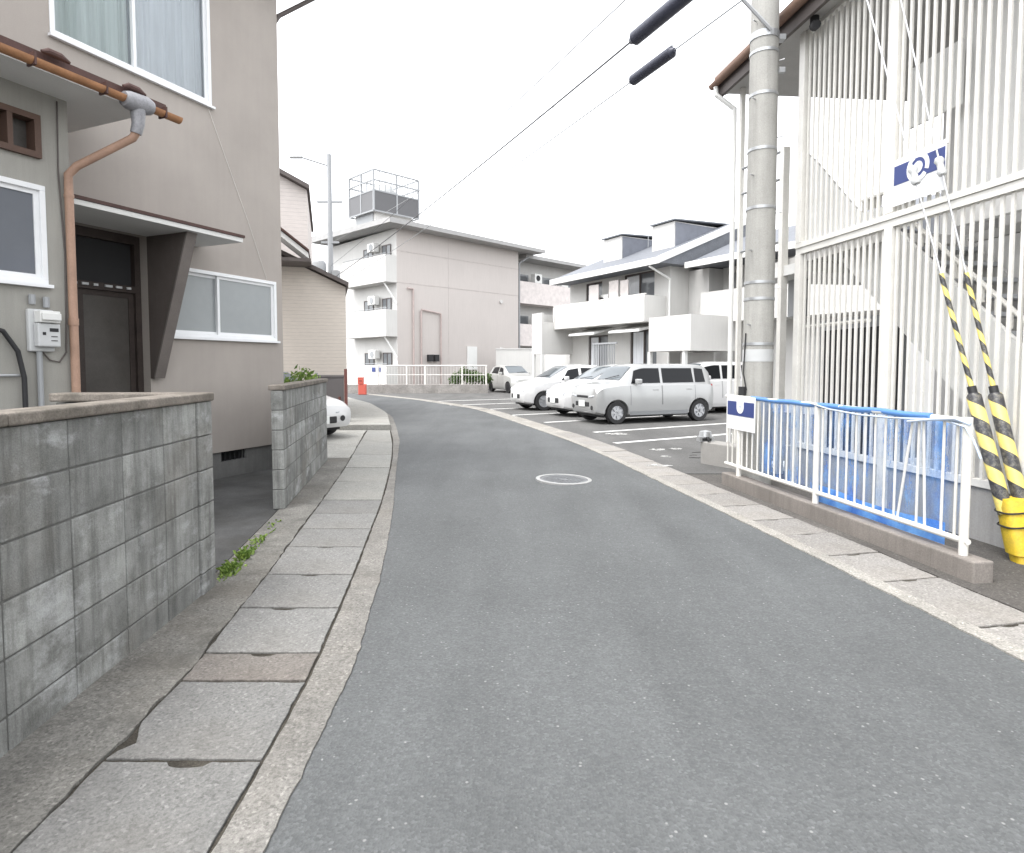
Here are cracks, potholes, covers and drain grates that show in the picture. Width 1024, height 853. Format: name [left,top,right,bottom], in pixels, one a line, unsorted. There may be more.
manhole cover [536,474,592,485]
